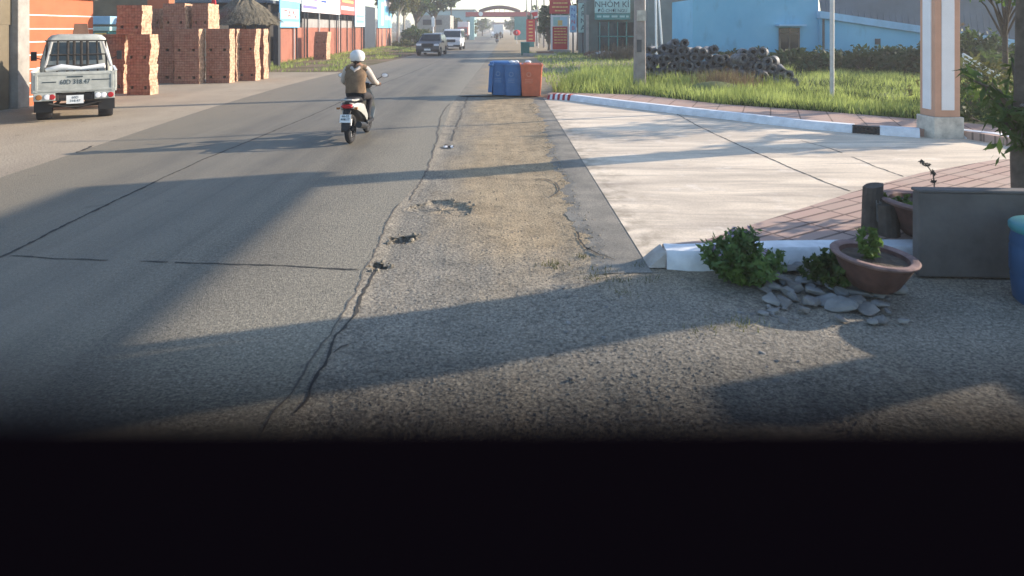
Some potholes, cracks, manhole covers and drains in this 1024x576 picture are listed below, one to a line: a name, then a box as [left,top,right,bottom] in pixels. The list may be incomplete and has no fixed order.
pothole [386,232,421,246]
crack [410,96,468,200]
pothole [401,198,478,216]
pothole [365,259,394,273]
crack [576,231,616,260]
